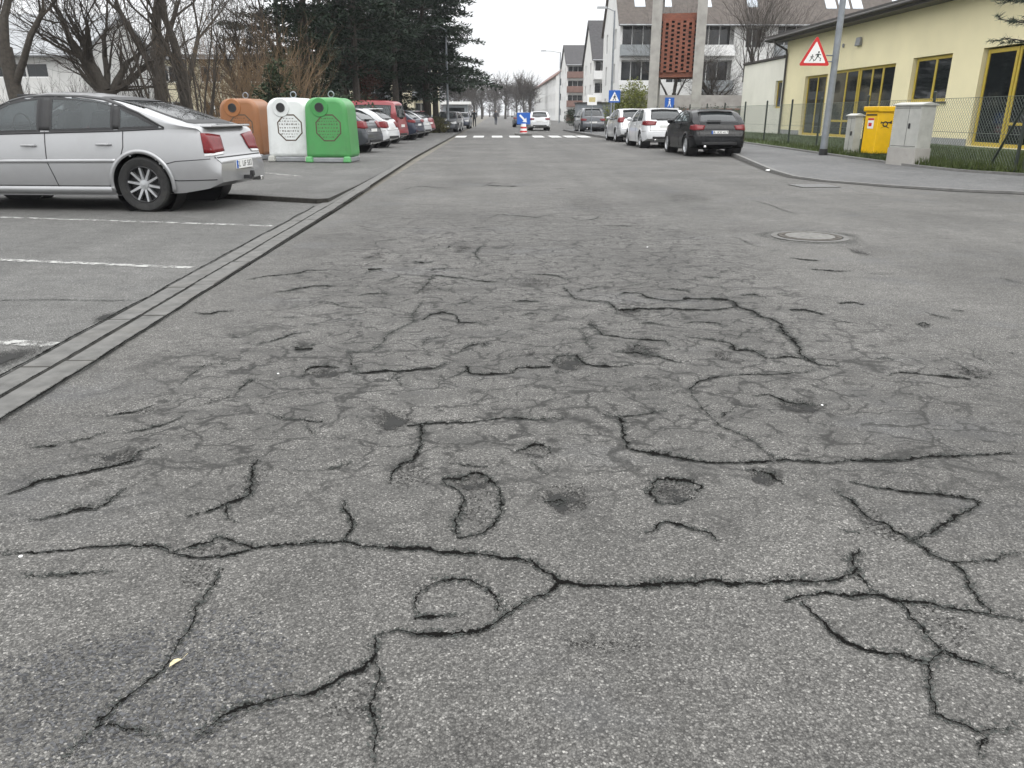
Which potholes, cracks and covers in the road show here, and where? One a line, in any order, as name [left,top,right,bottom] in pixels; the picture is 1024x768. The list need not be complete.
pothole [537,482,594,515]
pothole [651,475,702,503]
manhole cover [771,231,850,243]
pothole [457,488,503,536]
crack [0,193,1024,767]
pothole [743,469,784,486]
pothole [455,473,490,491]
